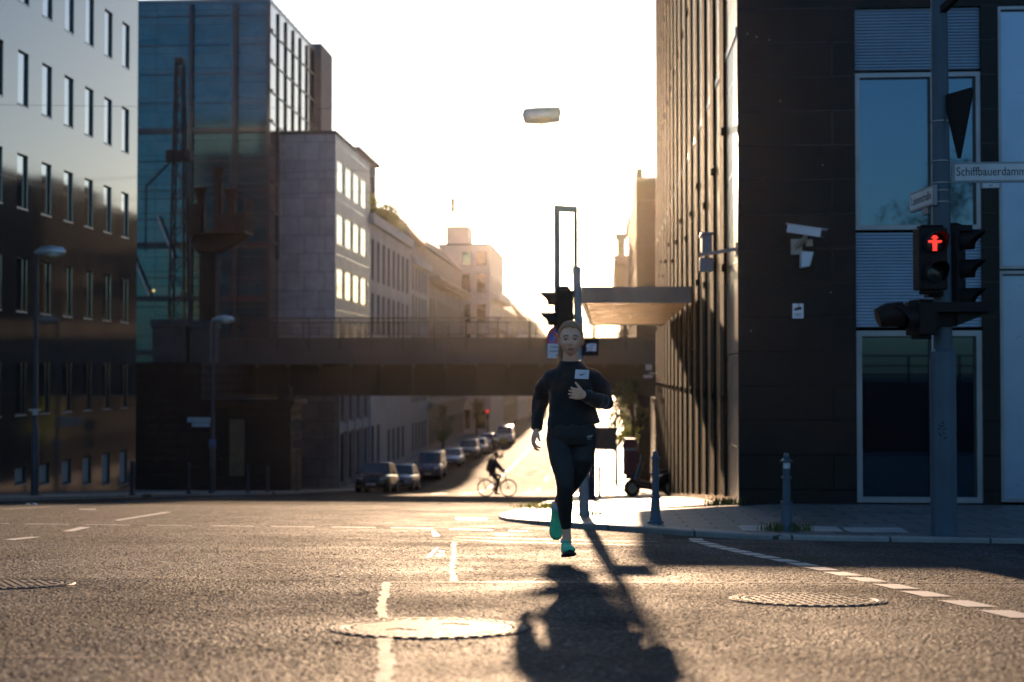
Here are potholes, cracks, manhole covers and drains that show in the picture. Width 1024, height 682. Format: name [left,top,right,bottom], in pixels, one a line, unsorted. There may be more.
manhole cover [329,617,528,639]
manhole cover [0,578,76,589]
manhole cover [728,592,888,607]
